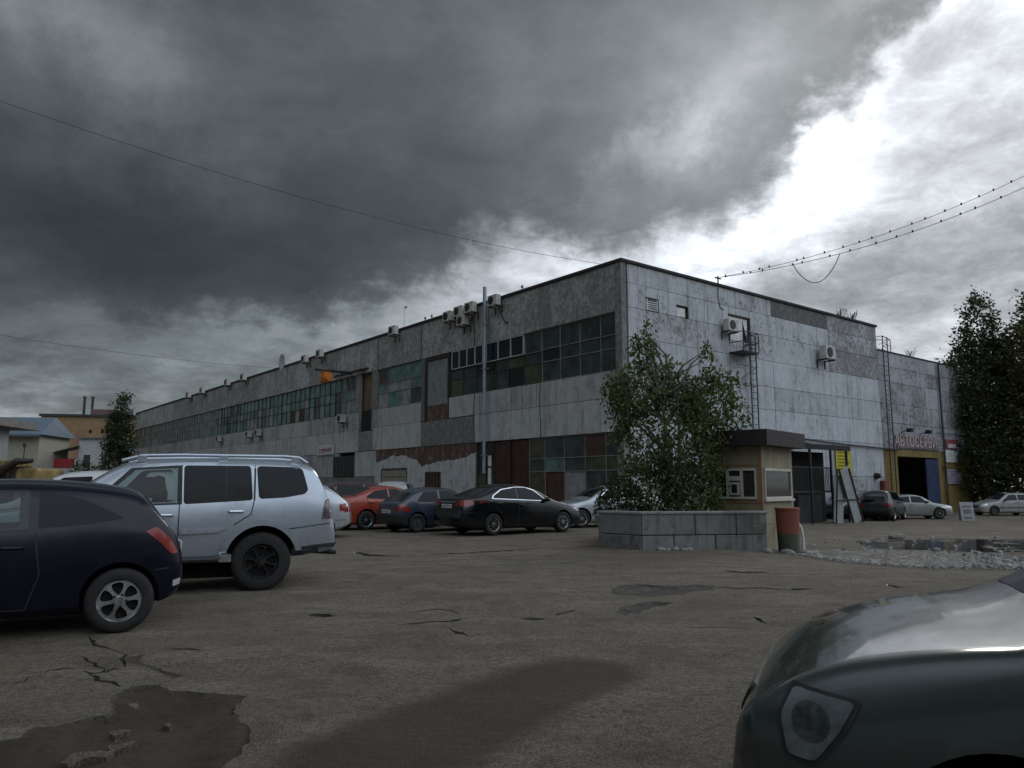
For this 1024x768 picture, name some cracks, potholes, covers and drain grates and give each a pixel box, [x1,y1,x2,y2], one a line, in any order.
pothole [0,685,251,768]
crack [158,636,217,651]
crack [355,548,539,556]
crack [360,609,473,637]
crack [680,617,768,629]
crack [3,635,135,687]
